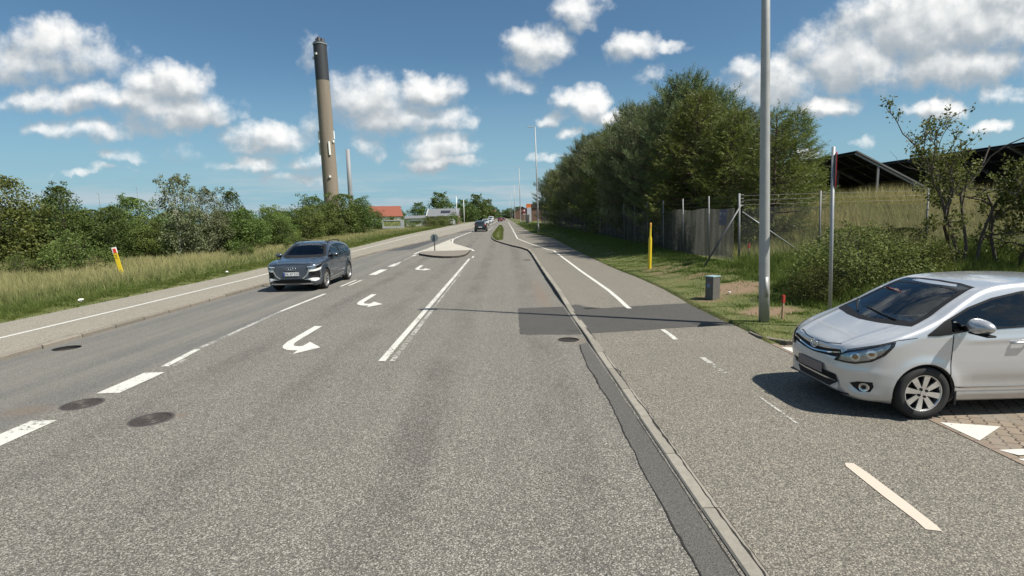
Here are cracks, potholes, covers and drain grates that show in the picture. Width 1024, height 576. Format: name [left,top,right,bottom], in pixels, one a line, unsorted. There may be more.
manhole cover [58,398,106,411]
manhole cover [126,412,175,427]
